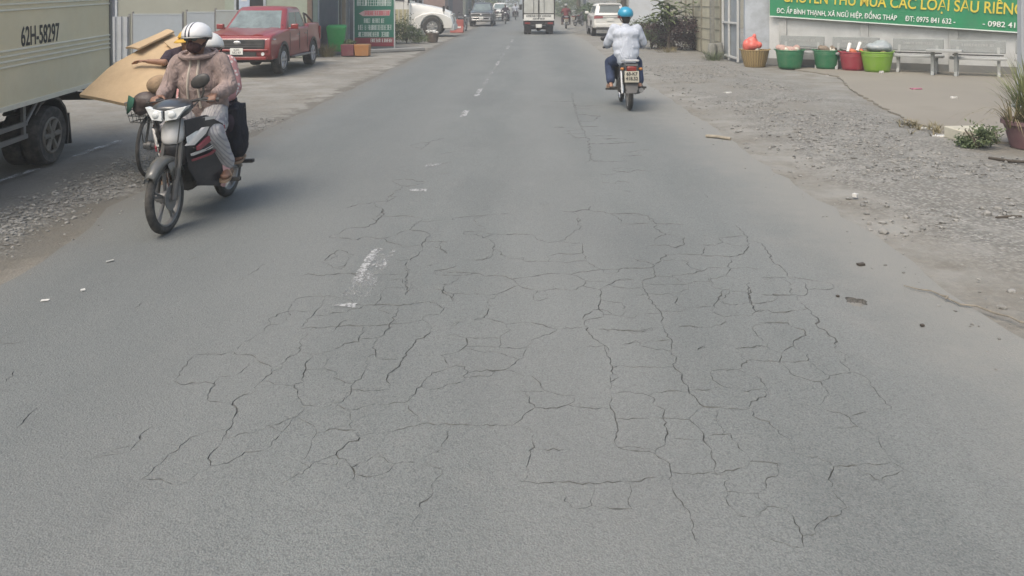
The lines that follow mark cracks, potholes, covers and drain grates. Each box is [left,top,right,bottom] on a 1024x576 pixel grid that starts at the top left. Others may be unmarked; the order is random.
crack [550,96,643,183]
crack [140,179,906,548]
